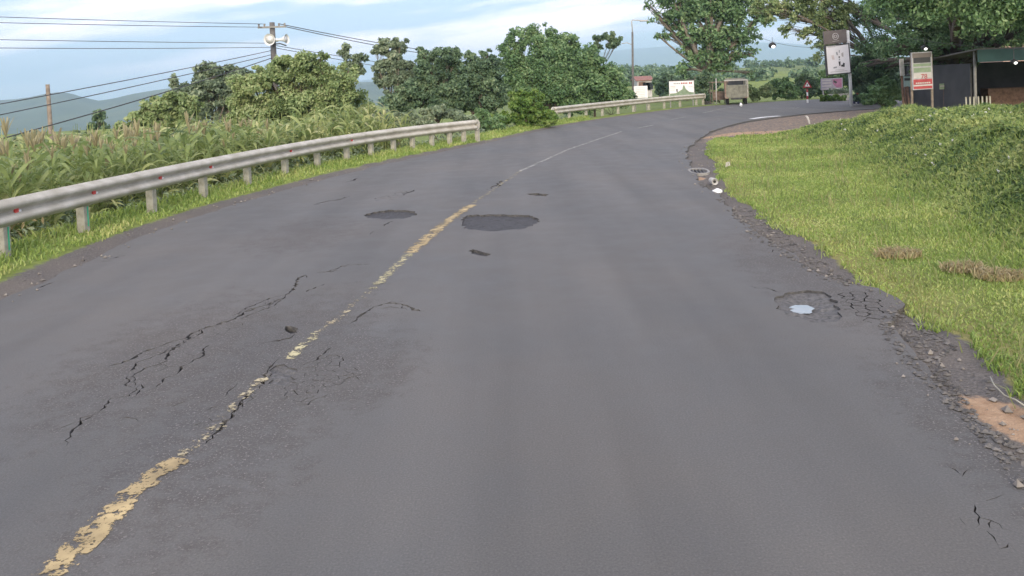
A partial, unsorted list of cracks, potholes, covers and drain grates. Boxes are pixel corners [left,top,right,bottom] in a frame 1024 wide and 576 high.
pothole [461,214,540,231]
crack [58,264,364,446]
pothole [774,290,842,323]
crack [837,291,884,323]
crack [350,301,420,324]
pothole [364,210,417,219]
crack [959,495,1019,564]
